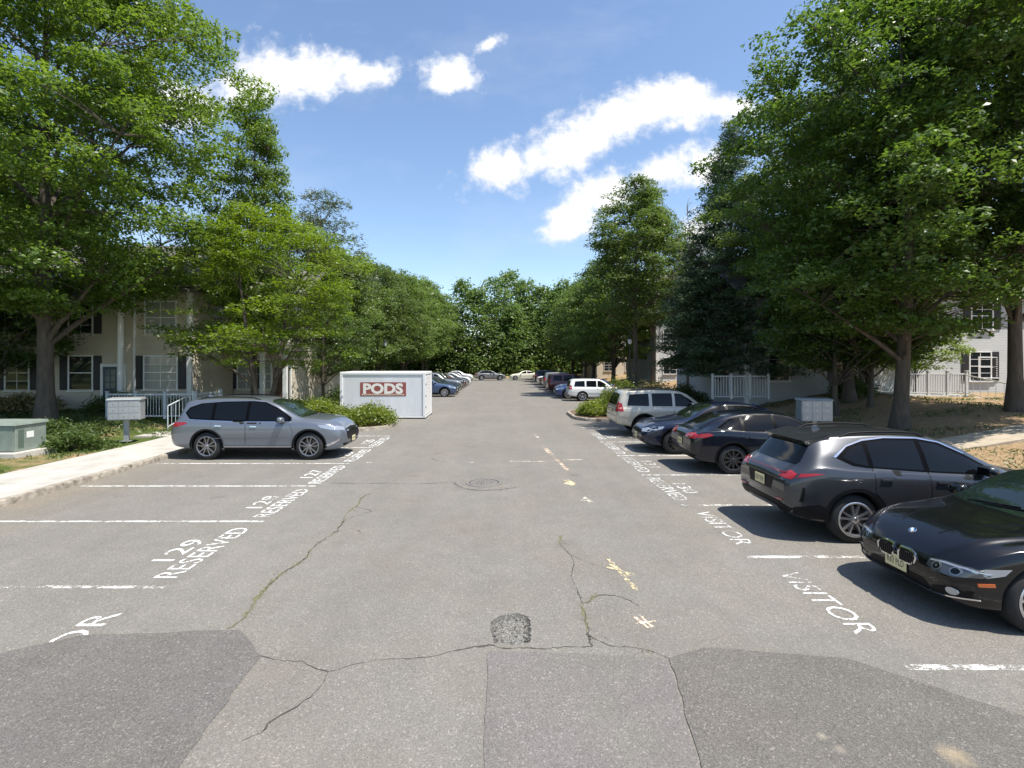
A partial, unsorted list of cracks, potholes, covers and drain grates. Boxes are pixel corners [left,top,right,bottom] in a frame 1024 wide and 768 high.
crack [226,482,518,630]
manhole cover [453,476,515,491]
crack [243,536,668,740]
pothole [490,613,531,645]
